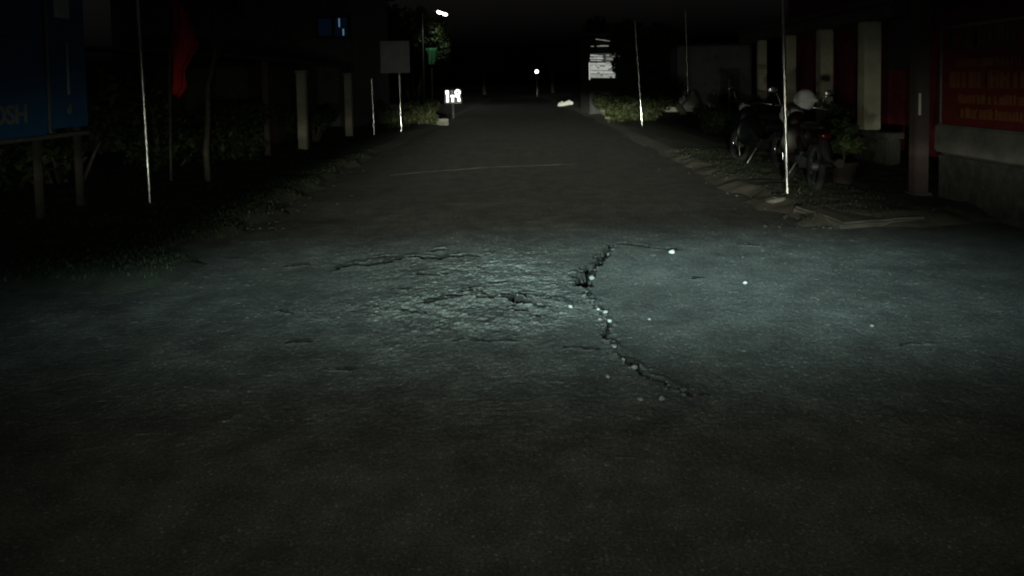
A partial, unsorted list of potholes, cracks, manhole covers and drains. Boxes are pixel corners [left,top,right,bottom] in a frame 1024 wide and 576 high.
crack [328,242,710,397]
